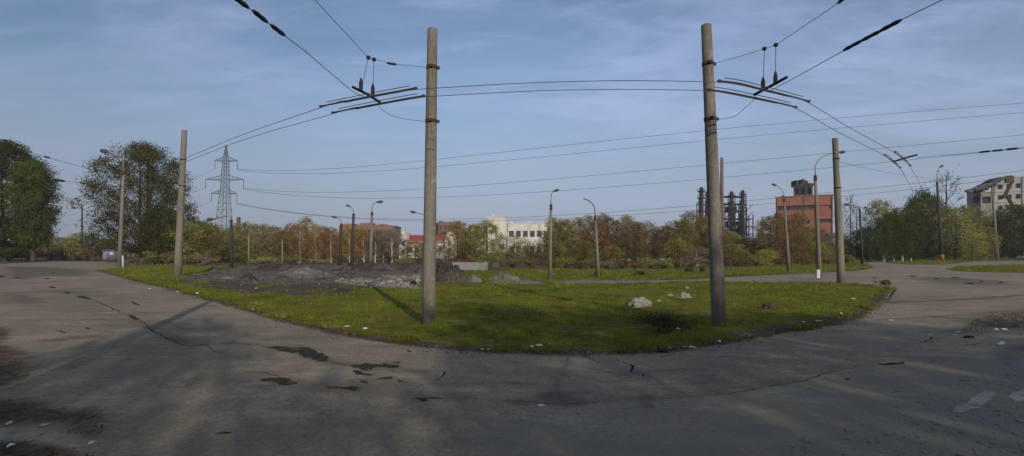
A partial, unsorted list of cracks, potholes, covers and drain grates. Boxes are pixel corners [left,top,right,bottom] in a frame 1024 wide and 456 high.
pothole [350,362,400,370]
pothole [259,377,298,385]
pothole [263,345,330,362]
crack [97,301,255,354]
